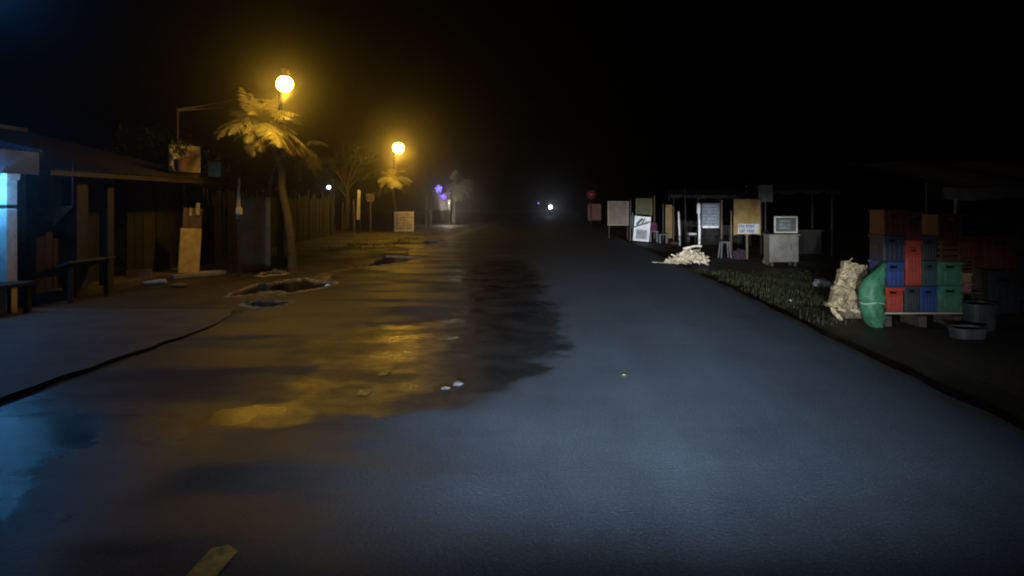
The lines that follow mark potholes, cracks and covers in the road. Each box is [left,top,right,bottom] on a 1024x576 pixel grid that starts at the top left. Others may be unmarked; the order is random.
pothole [223,277,339,297]
pothole [238,299,296,309]
pothole [365,255,423,267]
